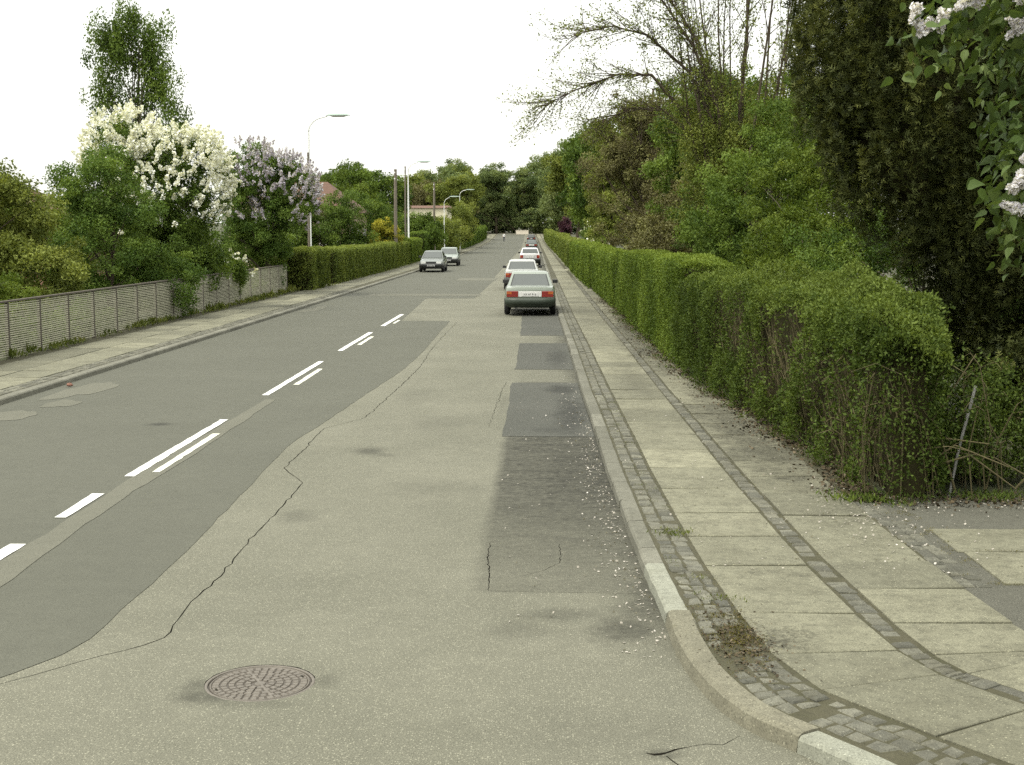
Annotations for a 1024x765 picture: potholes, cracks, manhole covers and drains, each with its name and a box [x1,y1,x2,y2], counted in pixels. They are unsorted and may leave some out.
crack [487,543,636,594]
crack [1,322,457,684]
crack [647,736,739,765]
manhole cover [204,665,315,702]
